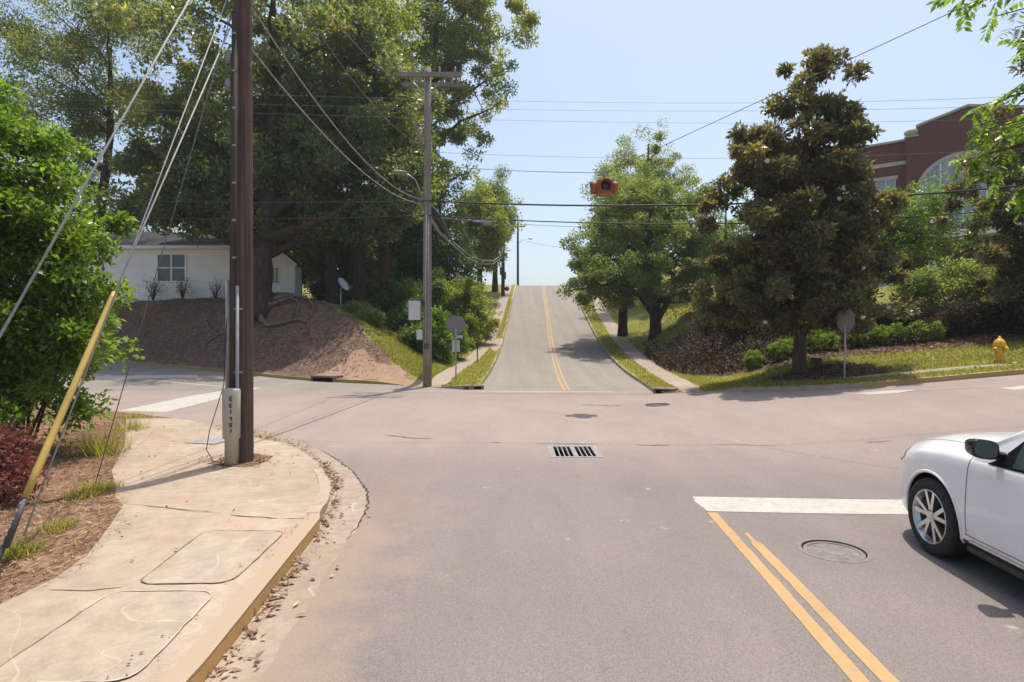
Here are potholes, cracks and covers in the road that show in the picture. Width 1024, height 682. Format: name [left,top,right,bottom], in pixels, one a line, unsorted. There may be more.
manhole cover [796,538,873,563]
utility cover [183,435,224,444]
drain grate [547,445,604,458]
